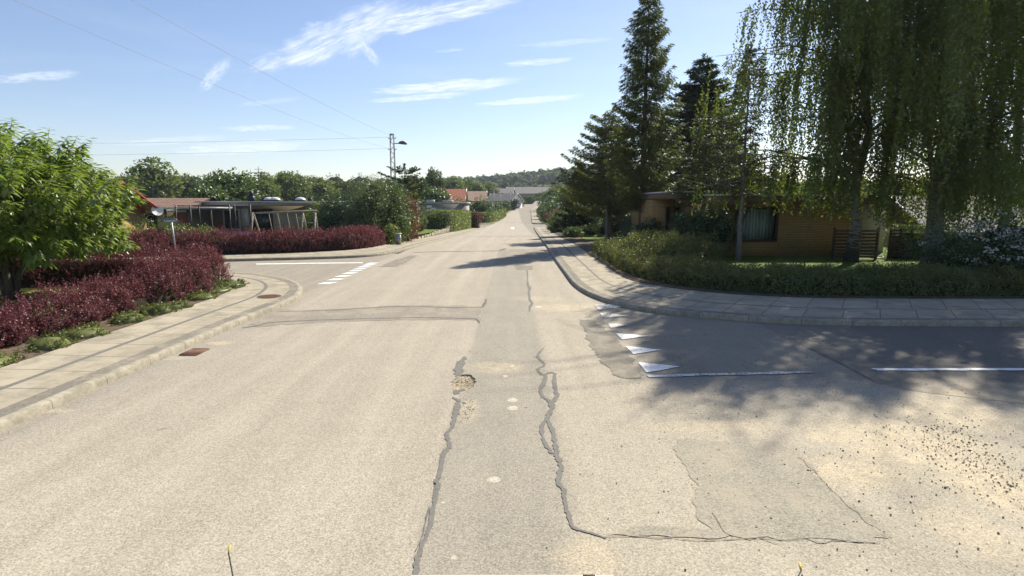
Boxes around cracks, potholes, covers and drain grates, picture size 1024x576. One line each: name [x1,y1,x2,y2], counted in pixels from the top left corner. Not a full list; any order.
pothole [450,374,477,391]
